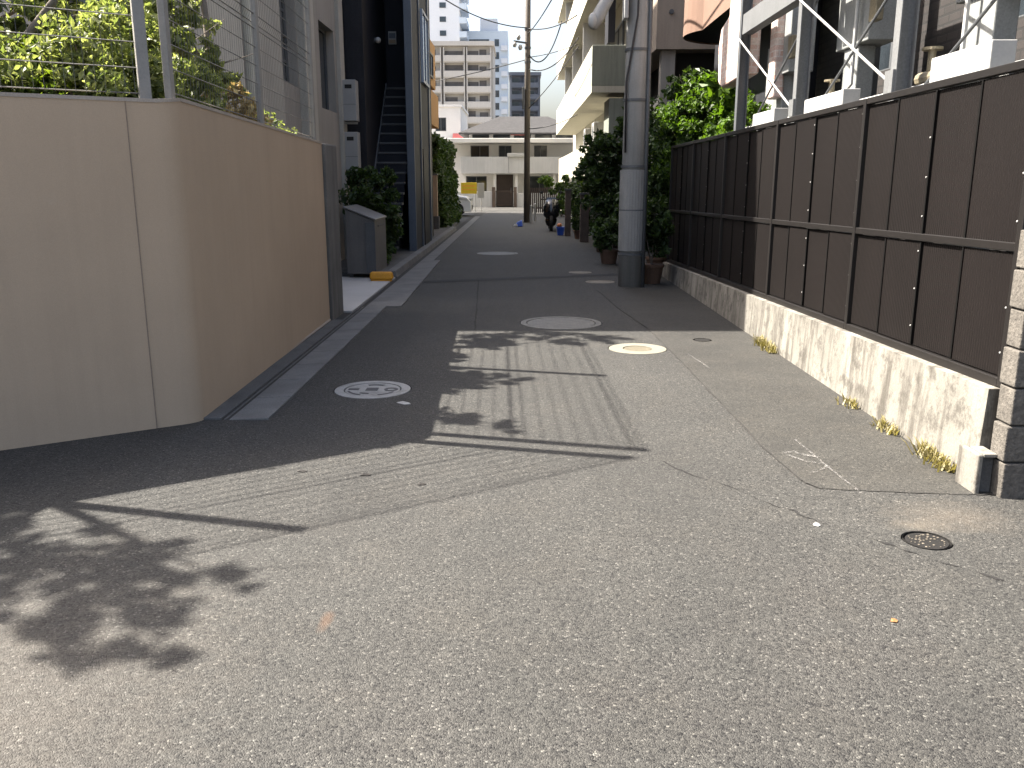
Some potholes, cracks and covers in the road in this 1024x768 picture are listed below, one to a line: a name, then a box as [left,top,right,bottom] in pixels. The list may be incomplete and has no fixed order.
crack [662,460,1022,588]
manhole cover [521,316,602,330]
manhole cover [609,343,666,354]
manhole cover [902,531,952,551]
manhole cover [334,381,411,399]
